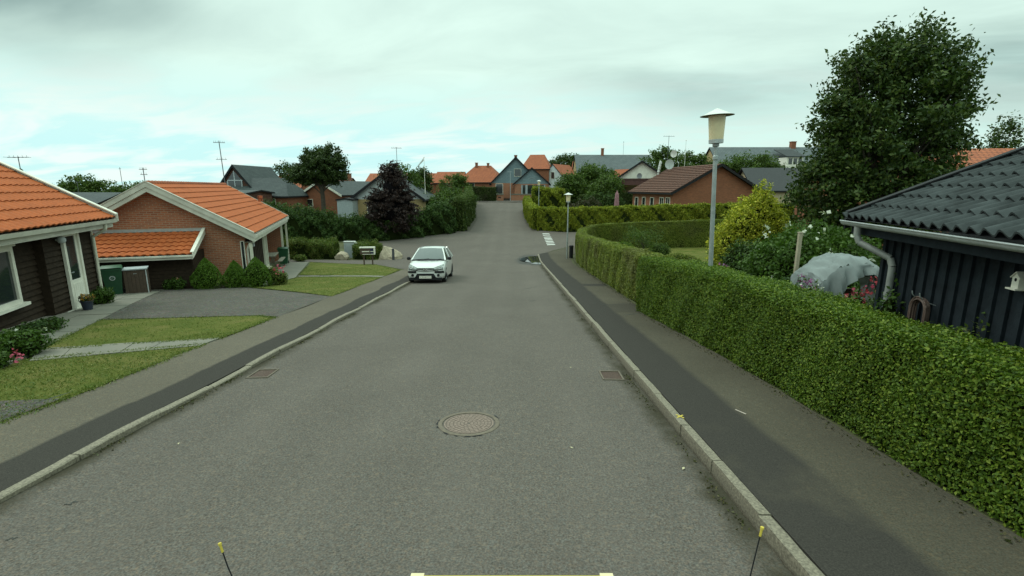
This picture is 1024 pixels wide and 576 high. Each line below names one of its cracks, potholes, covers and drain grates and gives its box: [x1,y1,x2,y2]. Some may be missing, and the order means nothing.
drain grate [245,369,279,379]
drain grate [599,370,625,380]
manhole cover [436,412,500,437]
